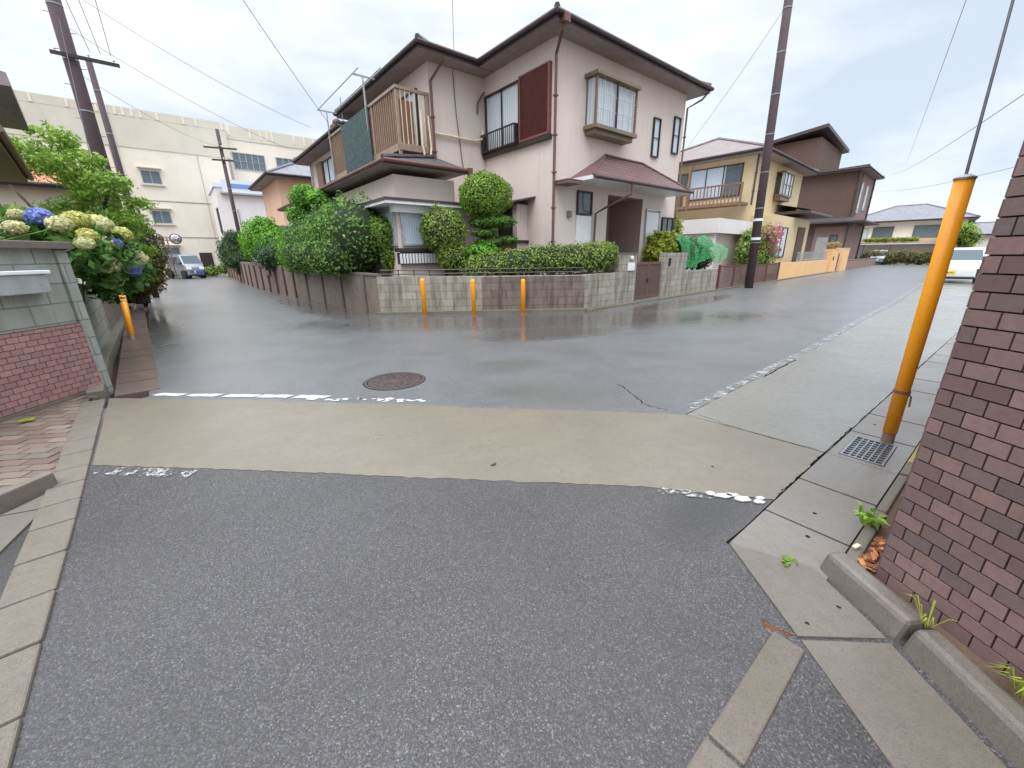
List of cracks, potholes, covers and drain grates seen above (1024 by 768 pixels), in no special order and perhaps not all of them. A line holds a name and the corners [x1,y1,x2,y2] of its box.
manhole cover [364,372,425,391]
drain grate [839,436,897,467]
